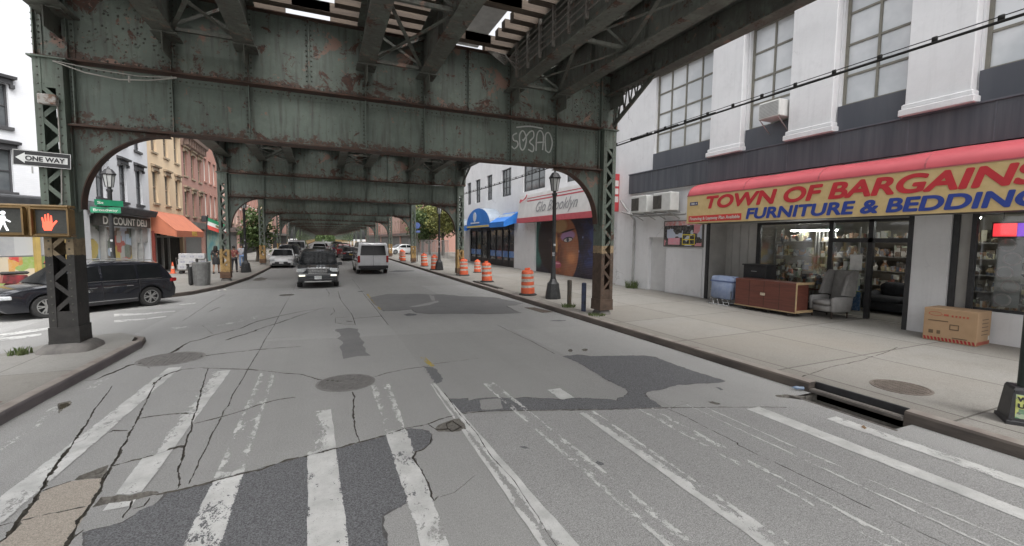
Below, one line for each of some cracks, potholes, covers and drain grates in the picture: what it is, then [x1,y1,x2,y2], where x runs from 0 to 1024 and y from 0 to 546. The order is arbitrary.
manhole cover [869,379,935,396]
manhole cover [315,374,375,392]
crack [0,307,478,546]
manhole cover [134,351,206,367]
pothole [435,418,466,432]
drain grate [790,382,910,431]
